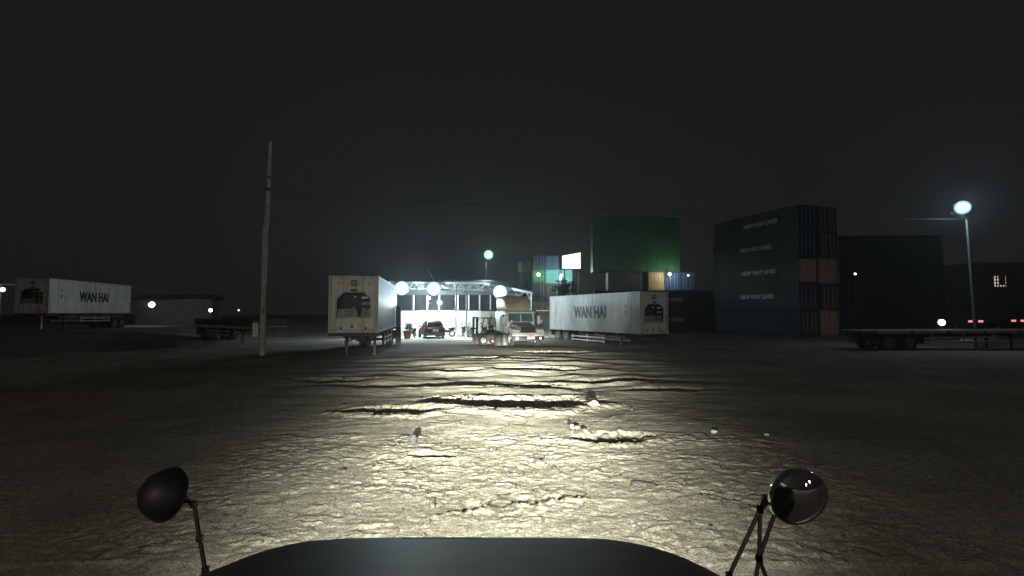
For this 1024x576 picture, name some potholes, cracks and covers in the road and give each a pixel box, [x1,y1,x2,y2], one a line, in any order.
crack [404,484,608,520]
